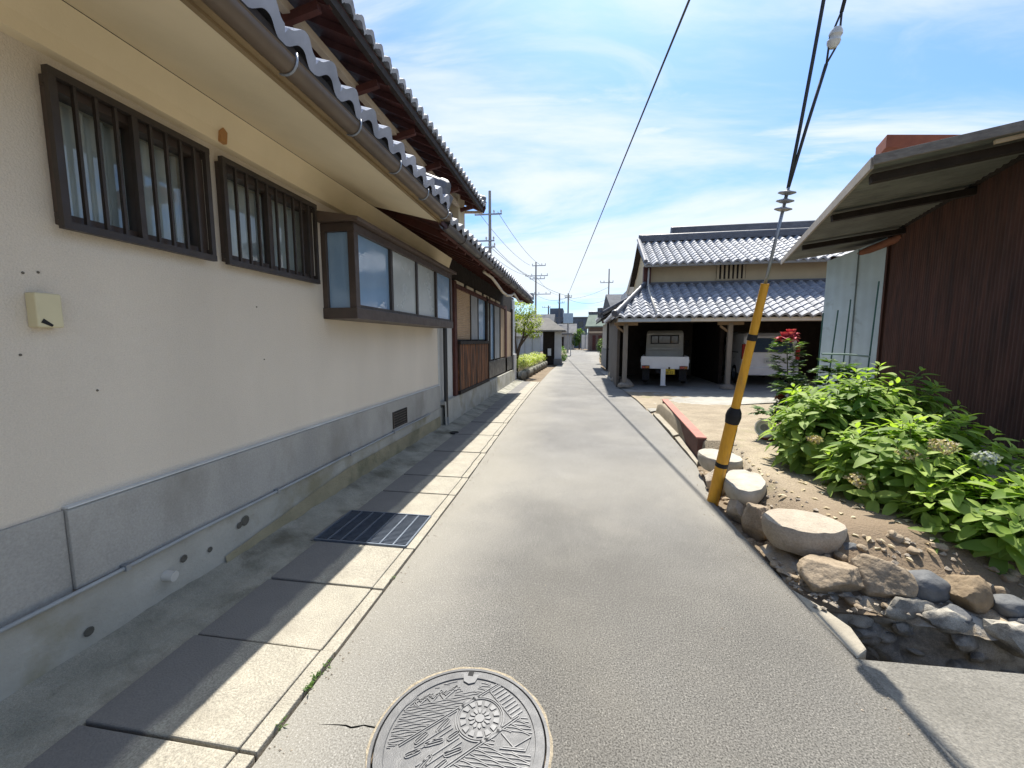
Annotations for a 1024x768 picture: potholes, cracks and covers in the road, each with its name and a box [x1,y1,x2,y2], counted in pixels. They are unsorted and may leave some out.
drain grate [310,510,439,552]
manhole cover [365,667,553,768]
